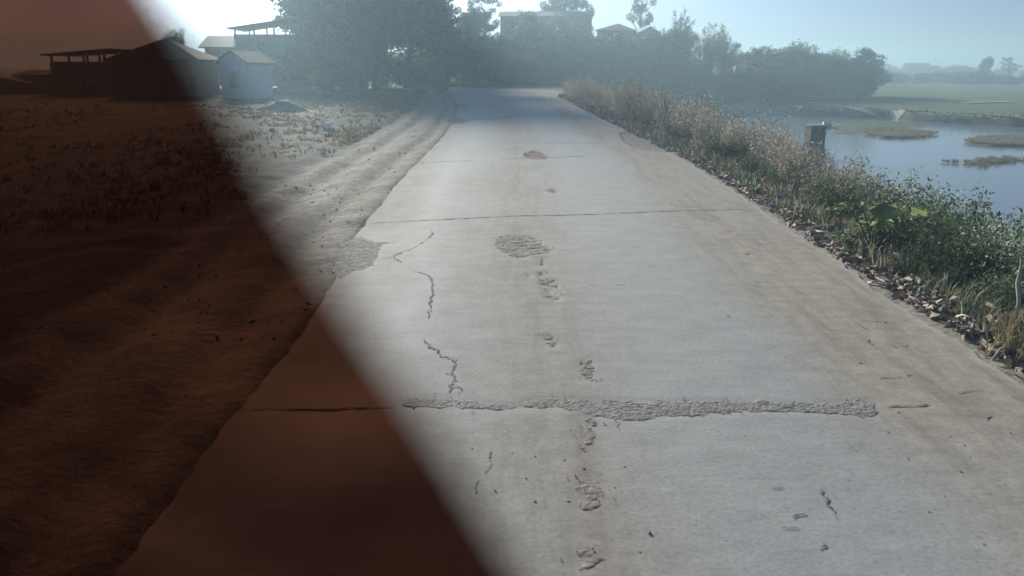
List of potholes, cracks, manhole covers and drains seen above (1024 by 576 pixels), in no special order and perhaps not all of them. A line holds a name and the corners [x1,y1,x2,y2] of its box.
crack [364,230,434,318]
pothole [332,236,383,279]
pothole [525,151,547,160]
pothole [578,359,597,382]
pothole [575,418,605,450]
pothole [567,471,615,512]
pothole [537,271,564,300]
pothole [492,234,553,258]
crack [423,339,462,394]
crack [772,487,836,529]
pothole [560,546,605,571]
